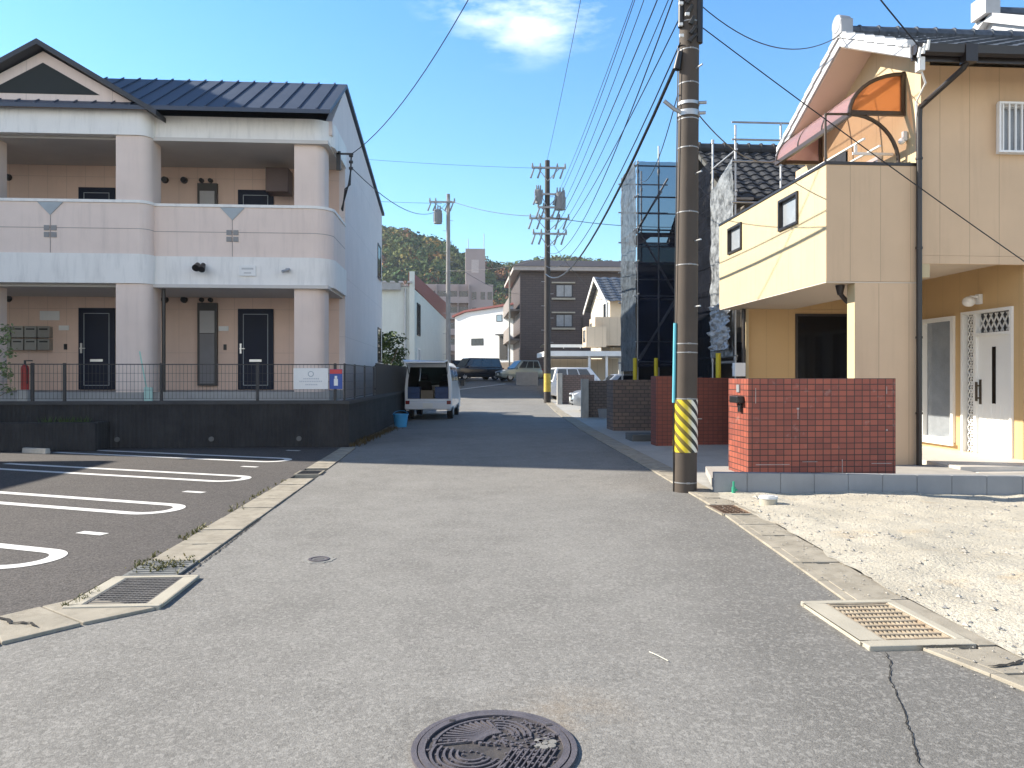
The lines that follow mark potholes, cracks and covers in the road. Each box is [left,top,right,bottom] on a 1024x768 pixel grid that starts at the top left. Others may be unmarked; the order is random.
drain grate [705,504,757,516]
drain grate [294,470,325,479]
manhole cover [411,710,577,768]
drain grate [62,575,200,610]
drain grate [801,599,976,651]
crack [886,653,920,764]
